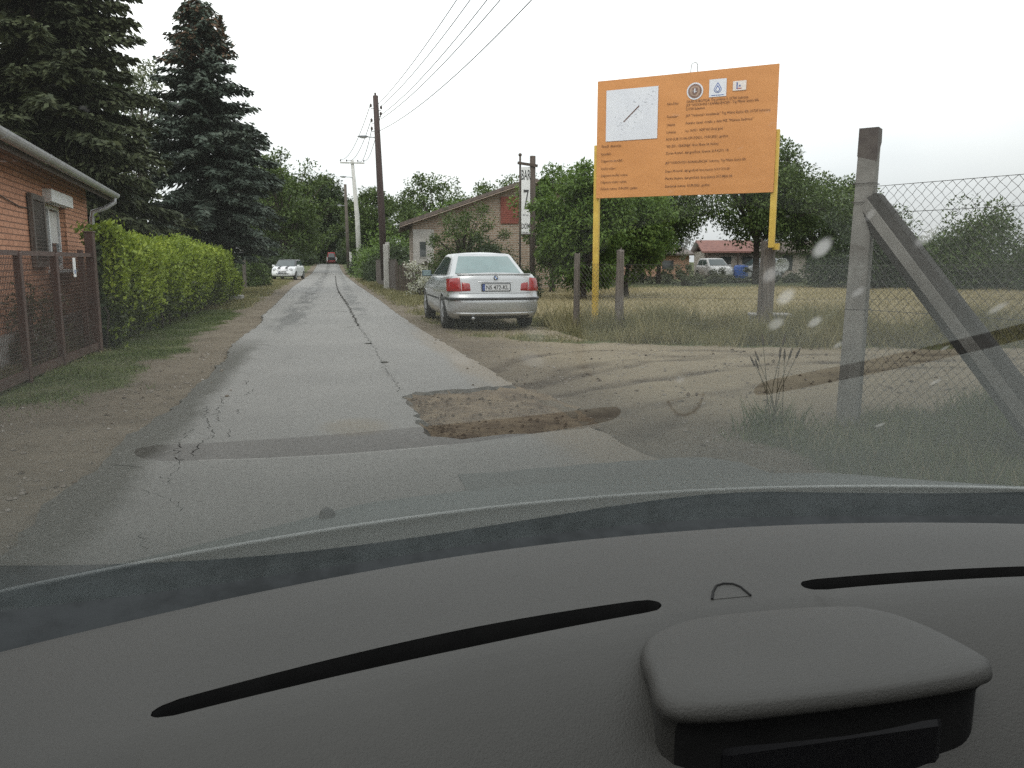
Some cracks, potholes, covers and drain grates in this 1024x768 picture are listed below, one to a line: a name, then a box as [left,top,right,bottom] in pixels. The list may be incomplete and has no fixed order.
crack [335,276,402,392]
